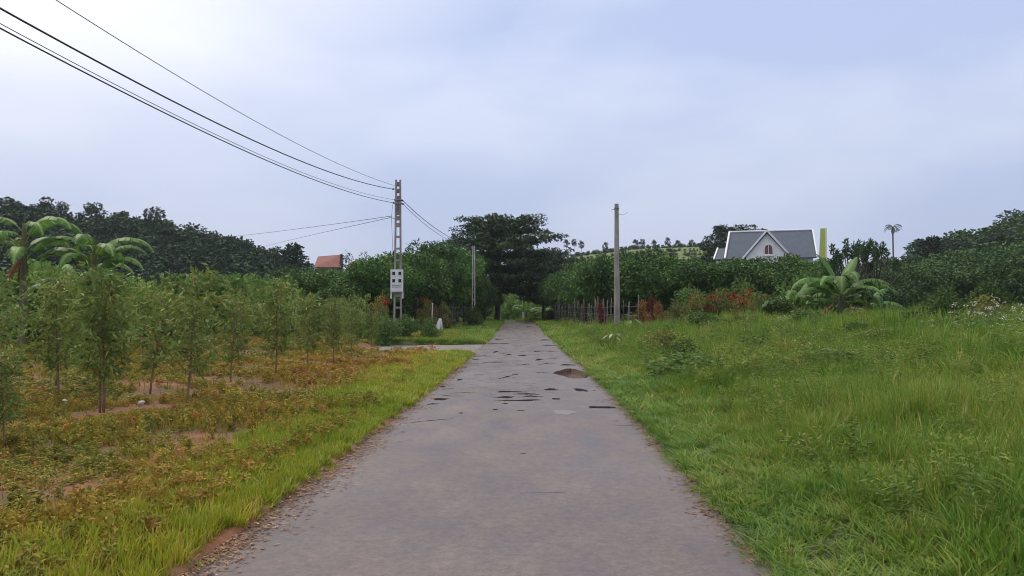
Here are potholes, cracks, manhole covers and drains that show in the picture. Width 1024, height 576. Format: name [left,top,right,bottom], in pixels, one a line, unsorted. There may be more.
pothole [553,368,587,378]
